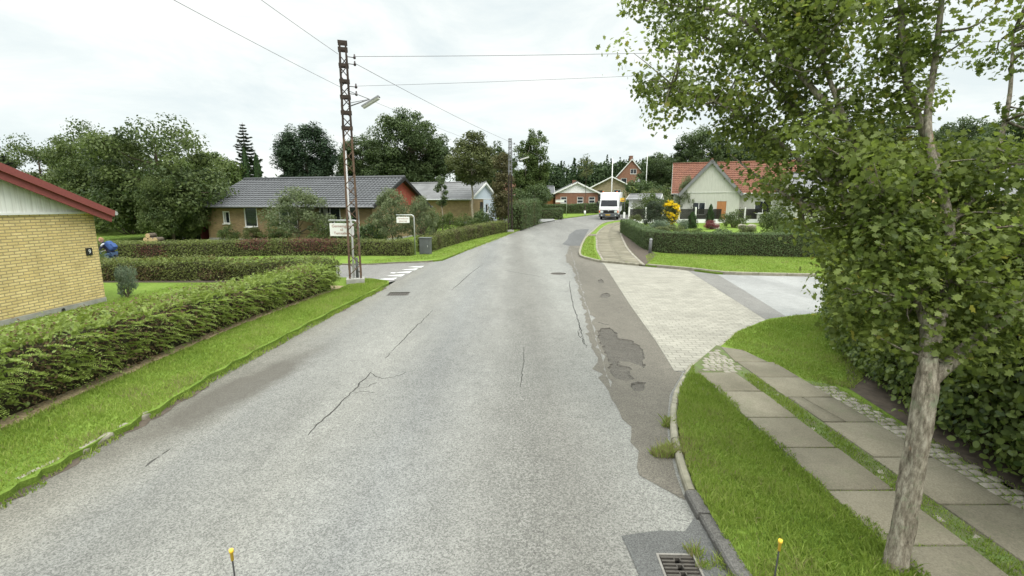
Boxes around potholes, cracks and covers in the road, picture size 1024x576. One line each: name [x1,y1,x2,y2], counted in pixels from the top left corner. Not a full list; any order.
pothole [631,381,646,391]
crack [308,372,404,435]
crack [565,282,608,348]
pothole [598,328,646,381]
drain grate [656,553,704,576]
